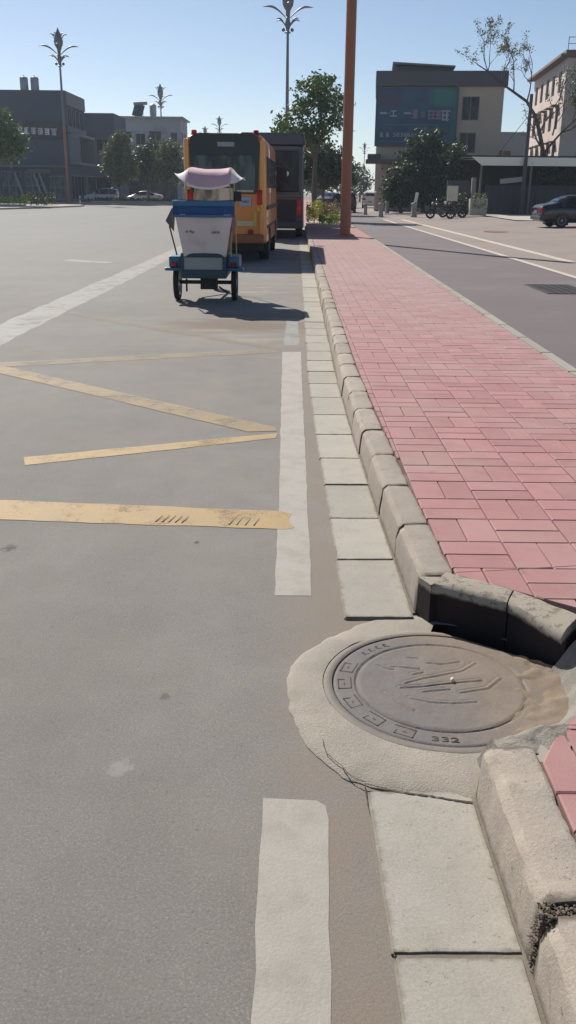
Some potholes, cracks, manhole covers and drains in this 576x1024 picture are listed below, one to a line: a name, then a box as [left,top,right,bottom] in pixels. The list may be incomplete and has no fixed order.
crack [323,740,472,815]
drain grate [524,284,576,294]
manhole cover [323,632,544,754]
